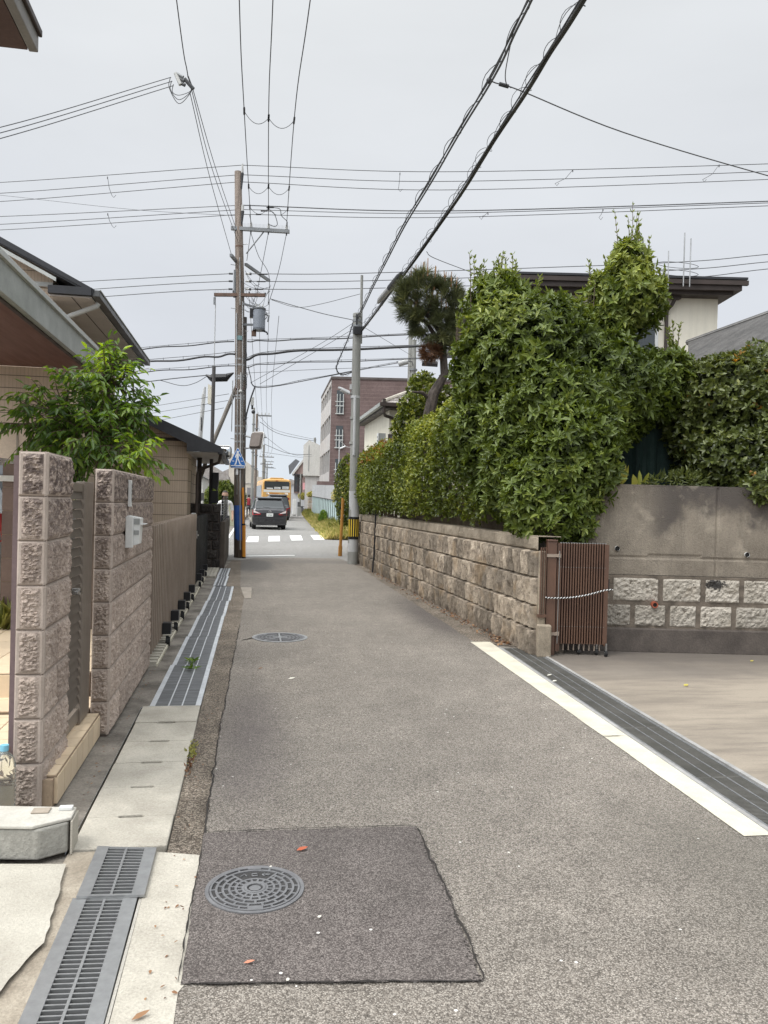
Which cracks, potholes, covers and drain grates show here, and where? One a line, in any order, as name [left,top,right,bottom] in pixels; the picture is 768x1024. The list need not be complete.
drain grate [213,576,229,586]
drain grate [570,692,660,728]
drain grate [199,601,229,616]
drain grate [503,648,560,668]
drain grate [207,586,234,601]
drain grate [622,727,742,778]
drain grate [18,897,137,1024]
manhole cover [205,865,304,914]
drain grate [150,665,211,707]
manhole cover [252,633,307,642]
drain grate [76,846,157,899]
drain grate [696,776,768,827]
